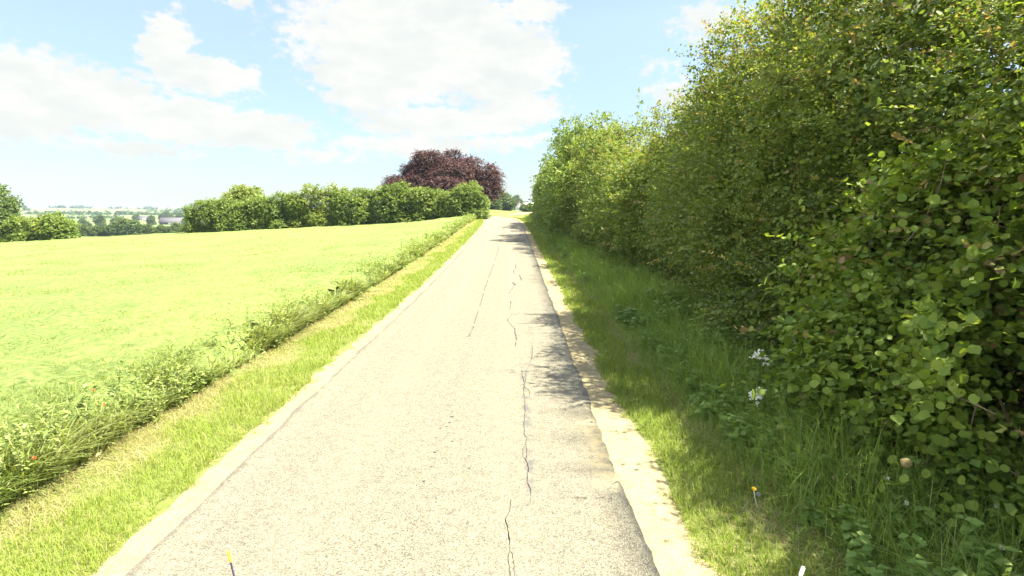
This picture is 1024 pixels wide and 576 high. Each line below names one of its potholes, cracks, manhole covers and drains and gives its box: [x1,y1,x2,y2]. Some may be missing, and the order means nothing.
crack [505,264,533,575]
